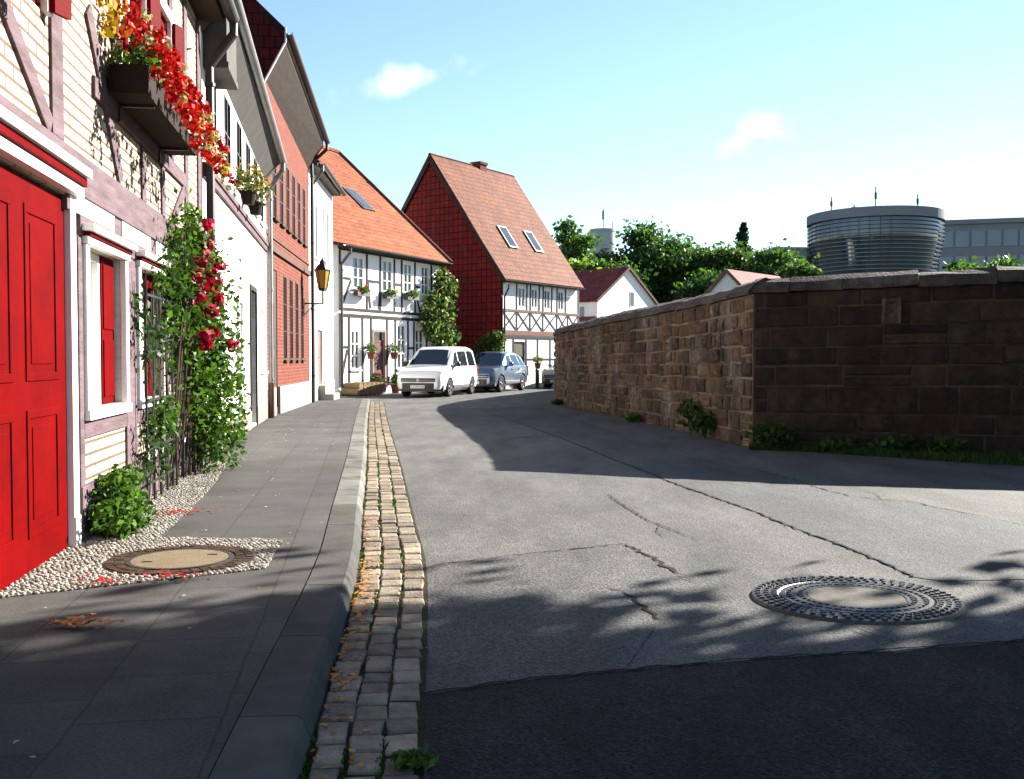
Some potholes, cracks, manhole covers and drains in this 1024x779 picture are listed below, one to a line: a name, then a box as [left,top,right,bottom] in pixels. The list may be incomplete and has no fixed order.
manhole cover [752,575,966,625]
manhole cover [102,545,255,576]
crack [423,495,698,620]
crack [484,411,914,576]
crack [753,468,1020,524]
